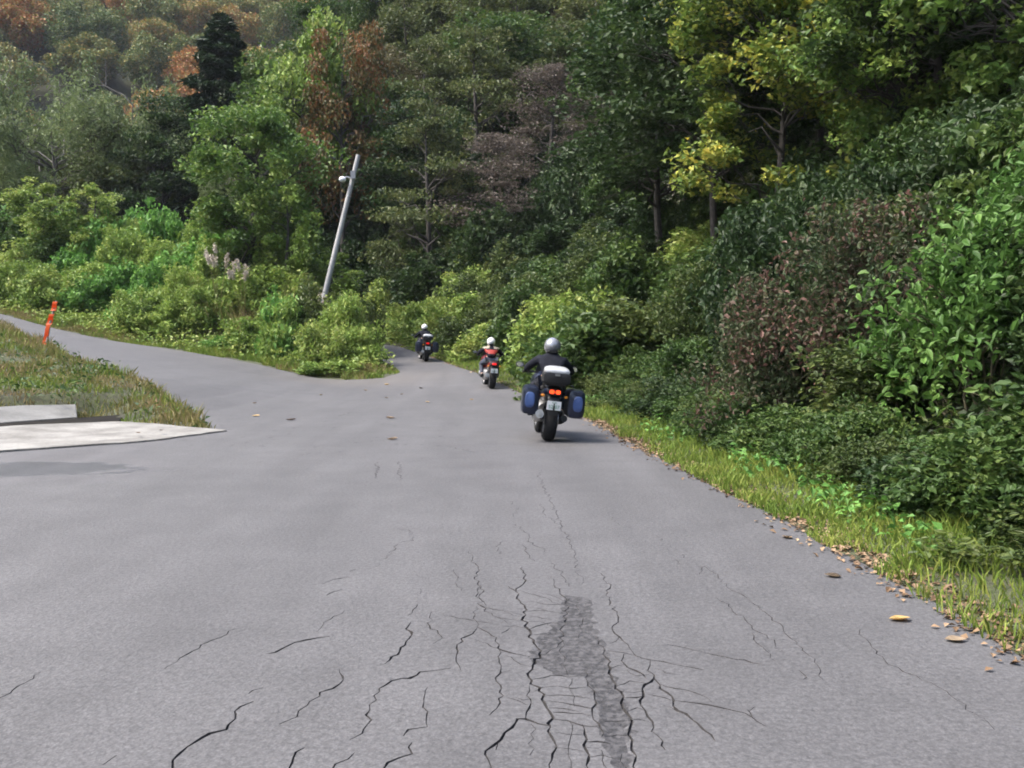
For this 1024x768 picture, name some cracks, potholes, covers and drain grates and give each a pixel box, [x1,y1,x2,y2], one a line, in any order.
crack [171,687,263,768]
crack [858,628,995,730]
crack [167,628,236,667]
crack [280,472,823,768]
